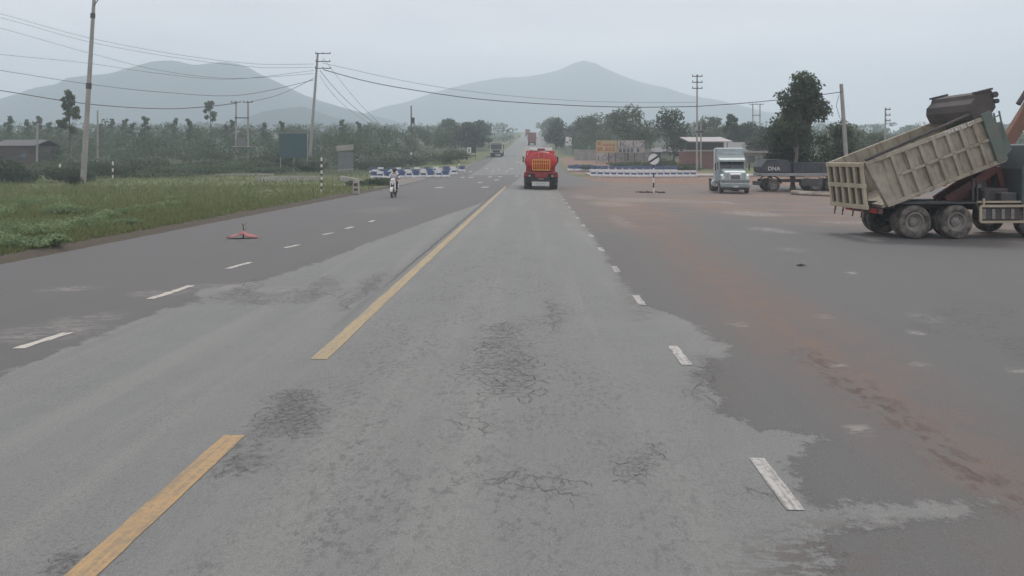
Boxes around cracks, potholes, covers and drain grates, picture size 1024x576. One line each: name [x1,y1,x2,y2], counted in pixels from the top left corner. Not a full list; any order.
crack [455,322,550,403]
crack [523,297,591,334]
crack [339,272,397,311]
crack [613,443,672,485]
crack [488,468,604,508]
crack [213,389,332,480]
crack [676,361,730,411]
